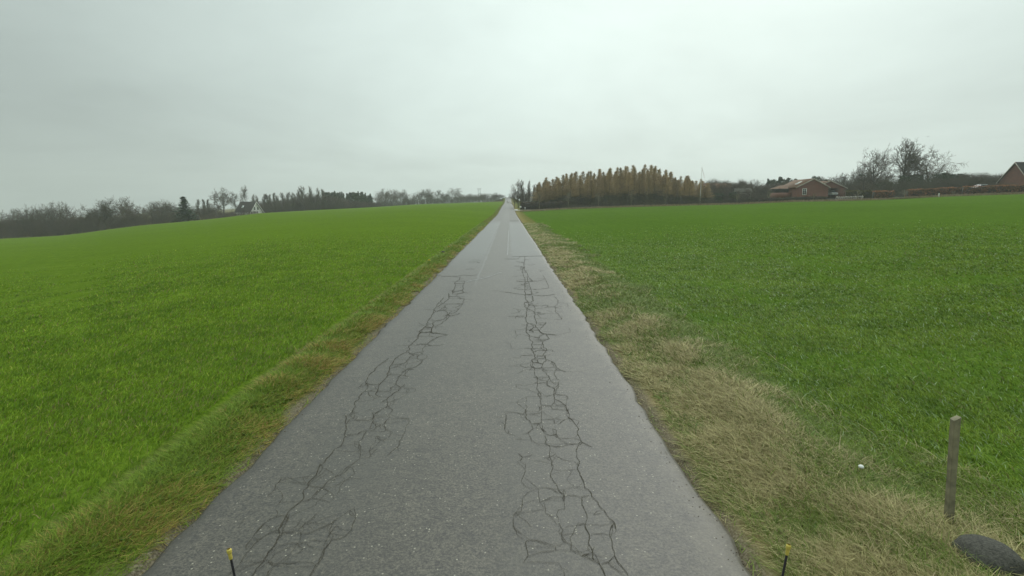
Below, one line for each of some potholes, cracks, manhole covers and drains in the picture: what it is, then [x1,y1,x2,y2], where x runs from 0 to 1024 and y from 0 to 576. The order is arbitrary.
crack [492,260,628,576]
crack [230,277,470,576]
